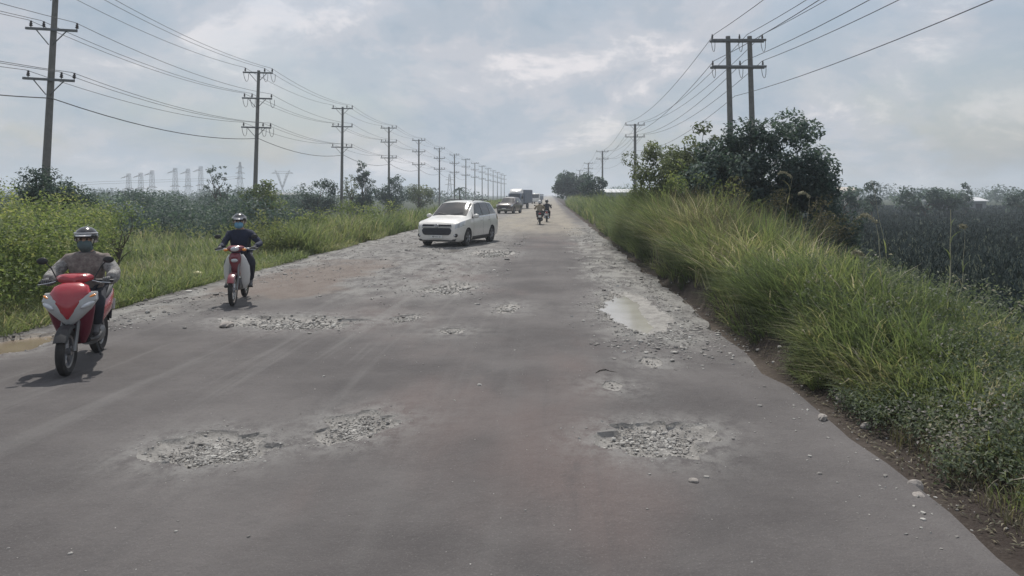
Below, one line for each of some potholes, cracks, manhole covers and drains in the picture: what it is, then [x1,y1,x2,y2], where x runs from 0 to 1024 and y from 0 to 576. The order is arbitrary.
pothole [638,356,663,368]
pothole [602,380,623,391]
pothole [550,412,765,475]
pothole [293,405,433,450]
pothole [492,303,524,314]
pothole [96,420,319,483]
pothole [577,287,715,357]
pothole [462,248,526,259]
pothole [383,312,429,324]
pothole [171,310,396,337]
pothole [393,280,490,298]
